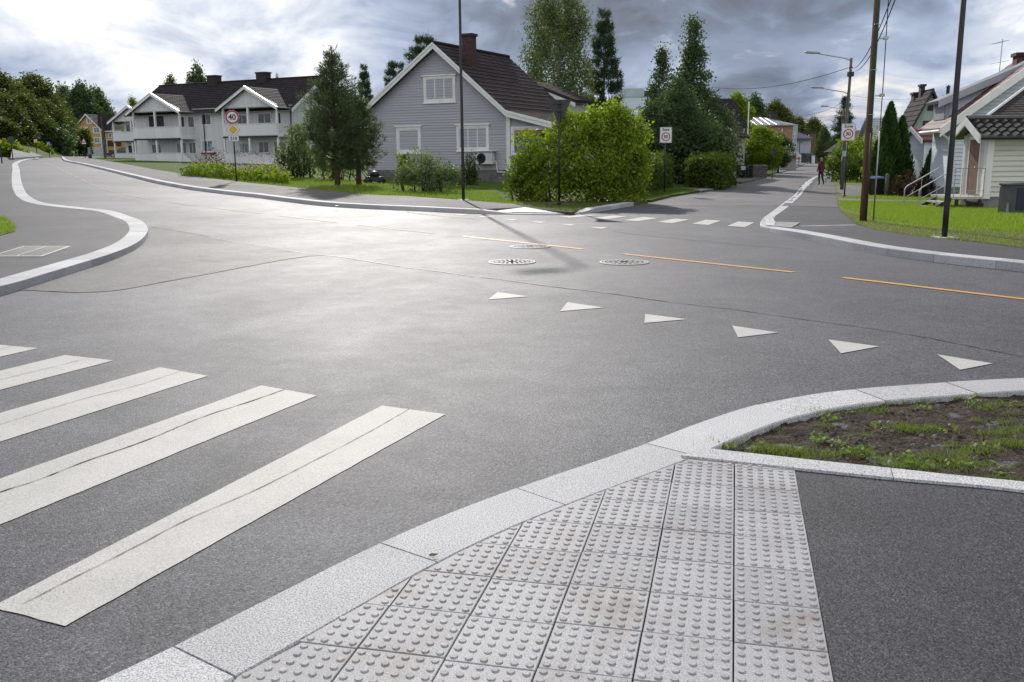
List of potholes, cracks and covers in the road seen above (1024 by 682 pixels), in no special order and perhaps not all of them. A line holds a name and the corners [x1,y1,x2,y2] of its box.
crack [22,408,410,604]
crack [0,389,284,492]
drain grate [0,246,71,257]
